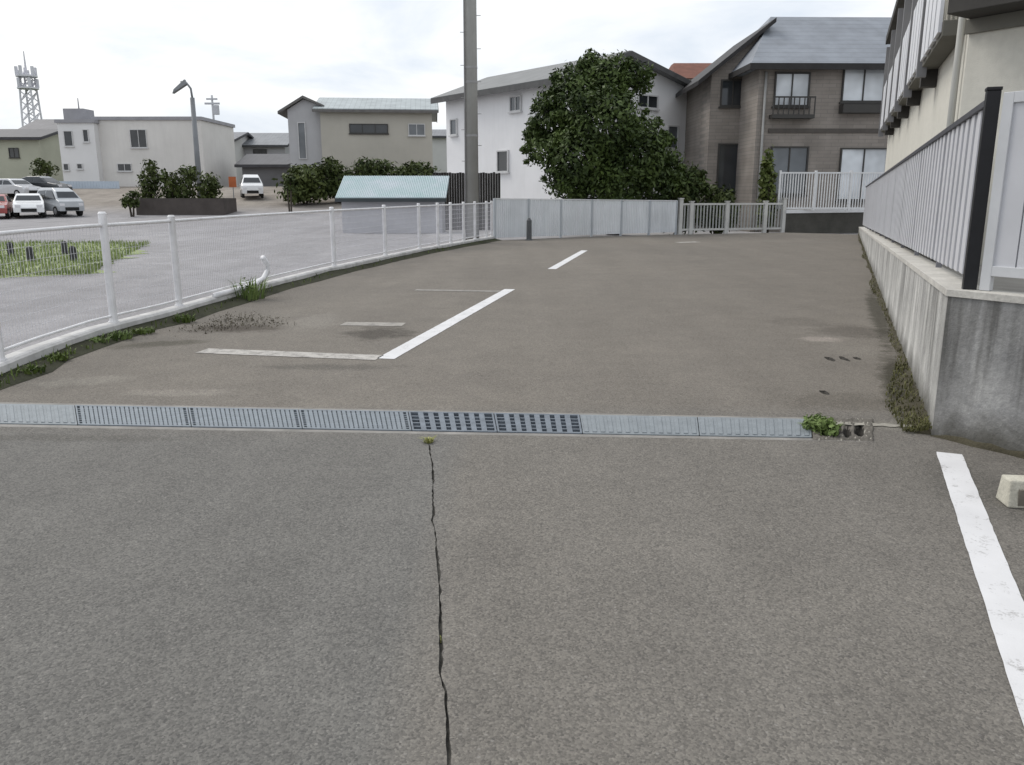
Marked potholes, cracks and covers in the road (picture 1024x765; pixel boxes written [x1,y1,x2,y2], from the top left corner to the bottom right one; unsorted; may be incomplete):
crack [429,445,451,765]
